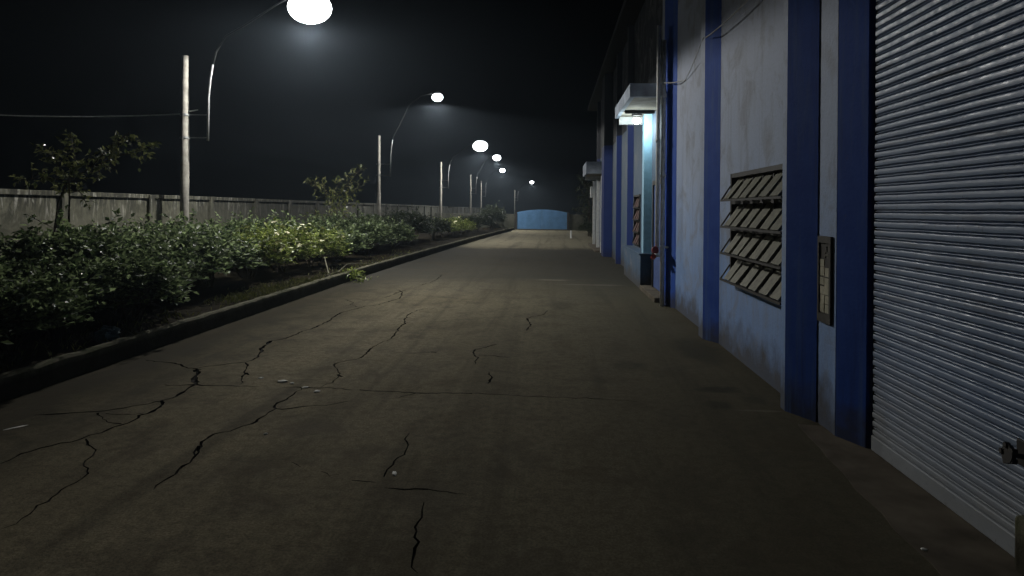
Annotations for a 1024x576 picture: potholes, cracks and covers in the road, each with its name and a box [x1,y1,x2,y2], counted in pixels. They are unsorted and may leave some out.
crack [472,344,508,383]
crack [2,274,443,529]
crack [321,434,456,572]
